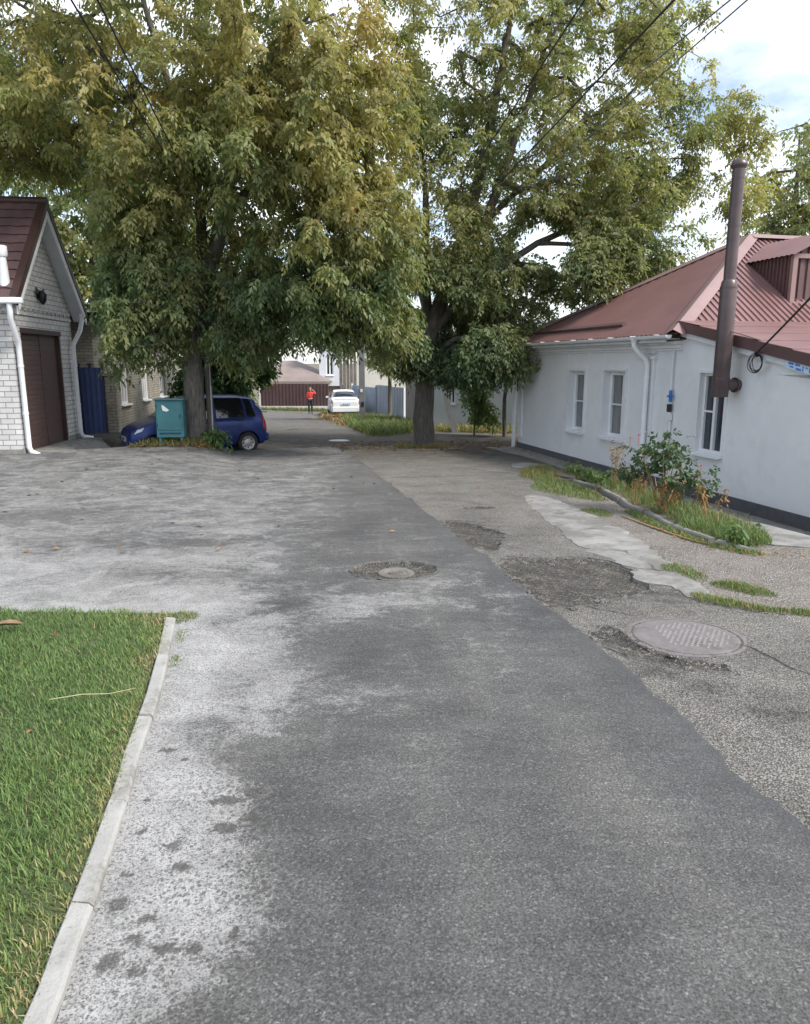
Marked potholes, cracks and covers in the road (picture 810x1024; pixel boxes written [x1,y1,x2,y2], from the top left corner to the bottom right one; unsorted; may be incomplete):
crack [739,644,810,675]
pothole [492,556,659,610]
pothole [441,520,507,552]
manhole cover [348,560,439,580]
manhole cover [625,618,747,657]
